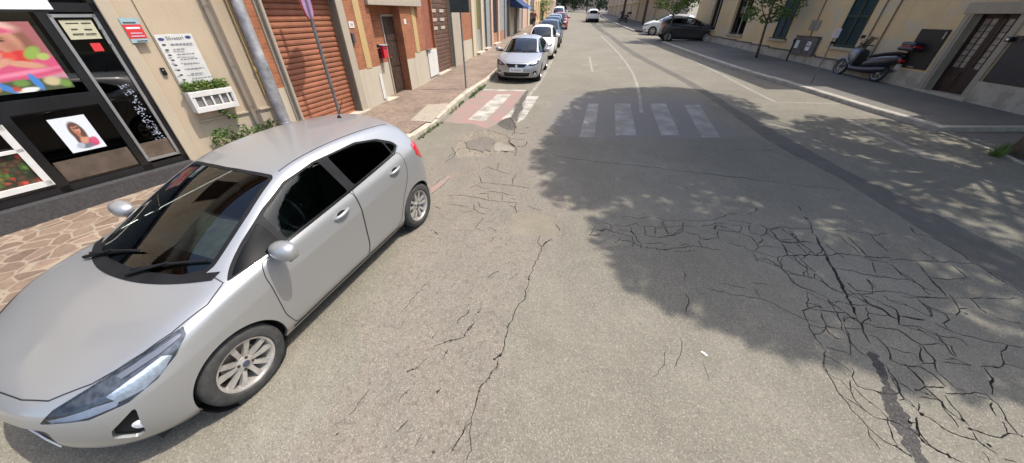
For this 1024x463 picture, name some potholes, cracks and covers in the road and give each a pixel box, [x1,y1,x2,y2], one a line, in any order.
crack [589,207,1023,462]
pothole [497,118,516,130]
pothole [452,129,518,158]
crack [336,237,551,462]
crack [431,126,560,241]
